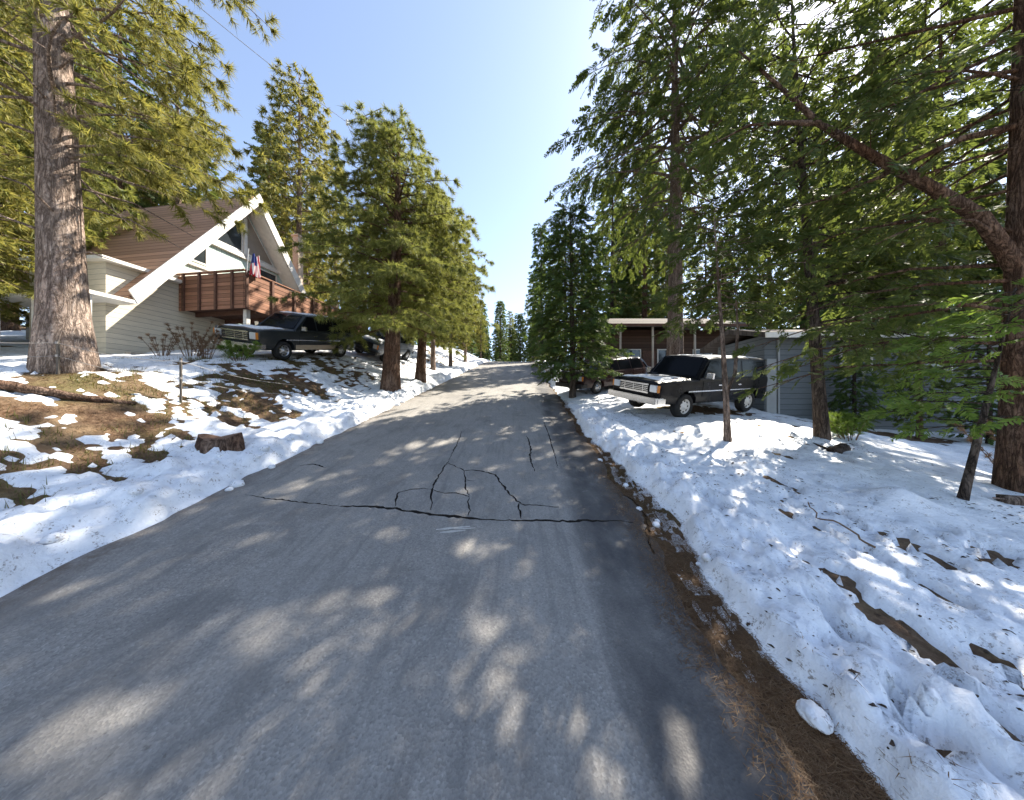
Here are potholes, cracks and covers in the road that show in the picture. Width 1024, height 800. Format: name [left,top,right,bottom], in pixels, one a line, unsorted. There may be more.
crack [252,420,655,554]
